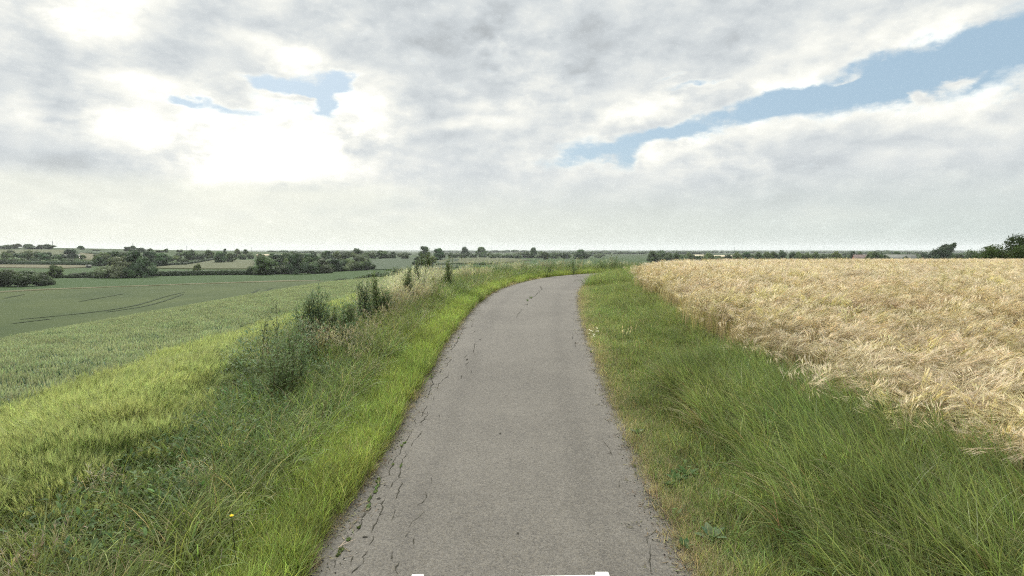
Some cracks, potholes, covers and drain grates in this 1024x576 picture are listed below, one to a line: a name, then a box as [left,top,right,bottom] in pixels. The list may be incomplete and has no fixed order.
crack [619,469,689,574]
crack [334,325,476,574]
